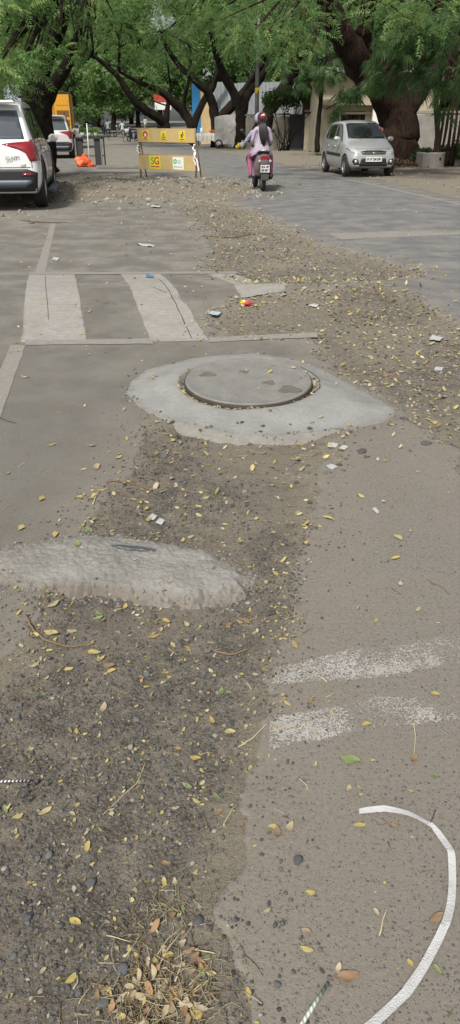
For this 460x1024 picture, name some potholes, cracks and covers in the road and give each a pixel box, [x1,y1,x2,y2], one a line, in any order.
manhole cover [127,353,395,446]
